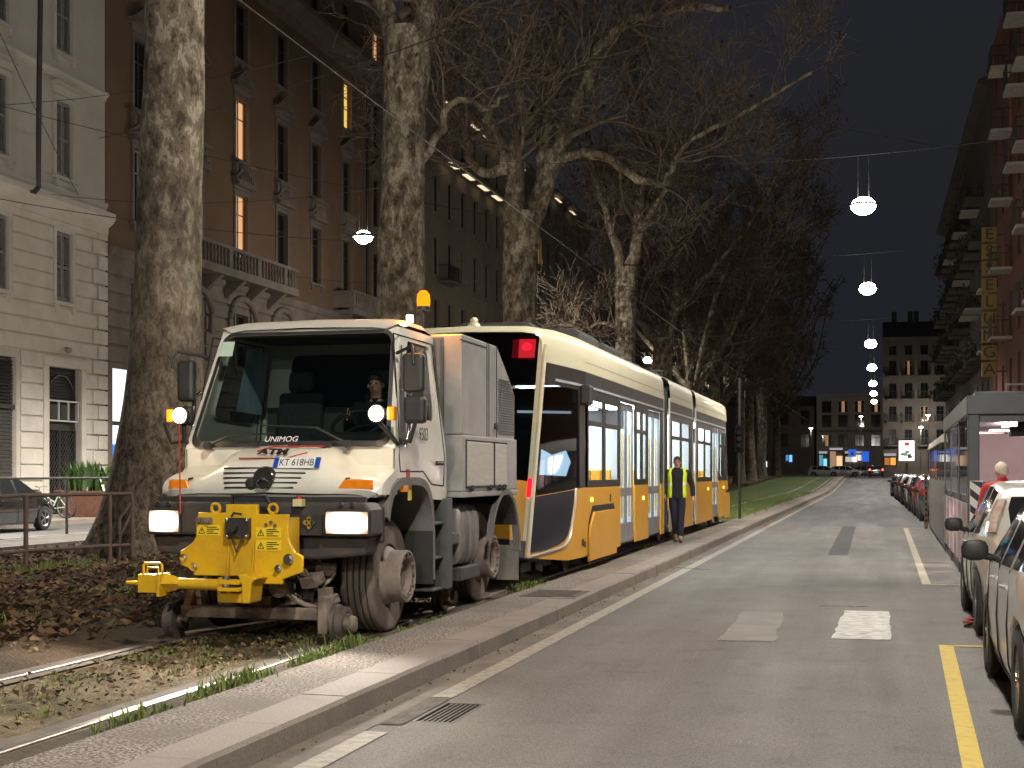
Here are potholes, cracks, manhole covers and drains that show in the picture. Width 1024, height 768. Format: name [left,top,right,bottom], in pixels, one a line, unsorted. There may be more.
drain grate [410,702,485,724]
